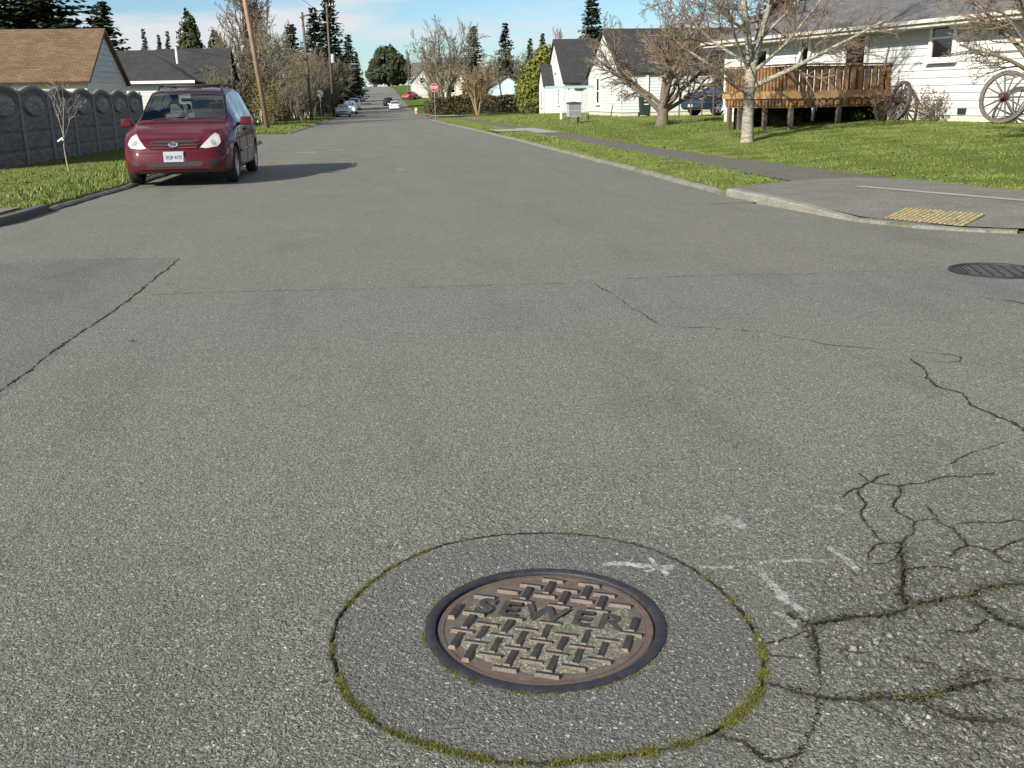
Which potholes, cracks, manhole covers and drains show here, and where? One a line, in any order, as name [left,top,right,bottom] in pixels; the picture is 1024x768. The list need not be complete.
manhole cover [948,263,1024,279]
manhole cover [418,567,672,696]
crack [907,351,1024,431]
crack [326,442,1024,768]
crack [597,285,898,351]
